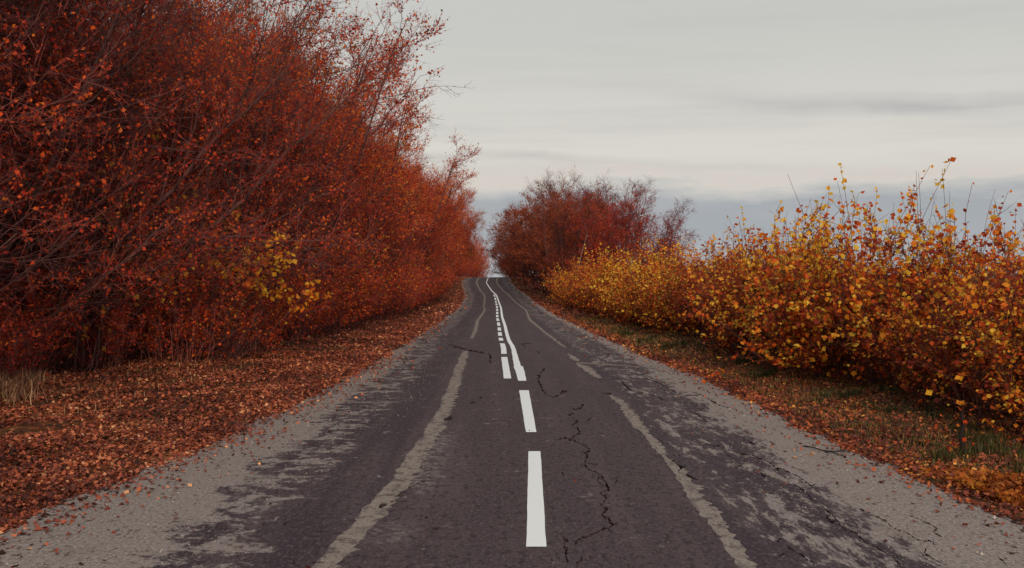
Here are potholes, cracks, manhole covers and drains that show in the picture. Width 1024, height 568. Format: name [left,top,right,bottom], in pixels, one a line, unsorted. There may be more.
crack [706,437,945,568]
crack [522,343,618,567]
crack [449,344,493,363]
